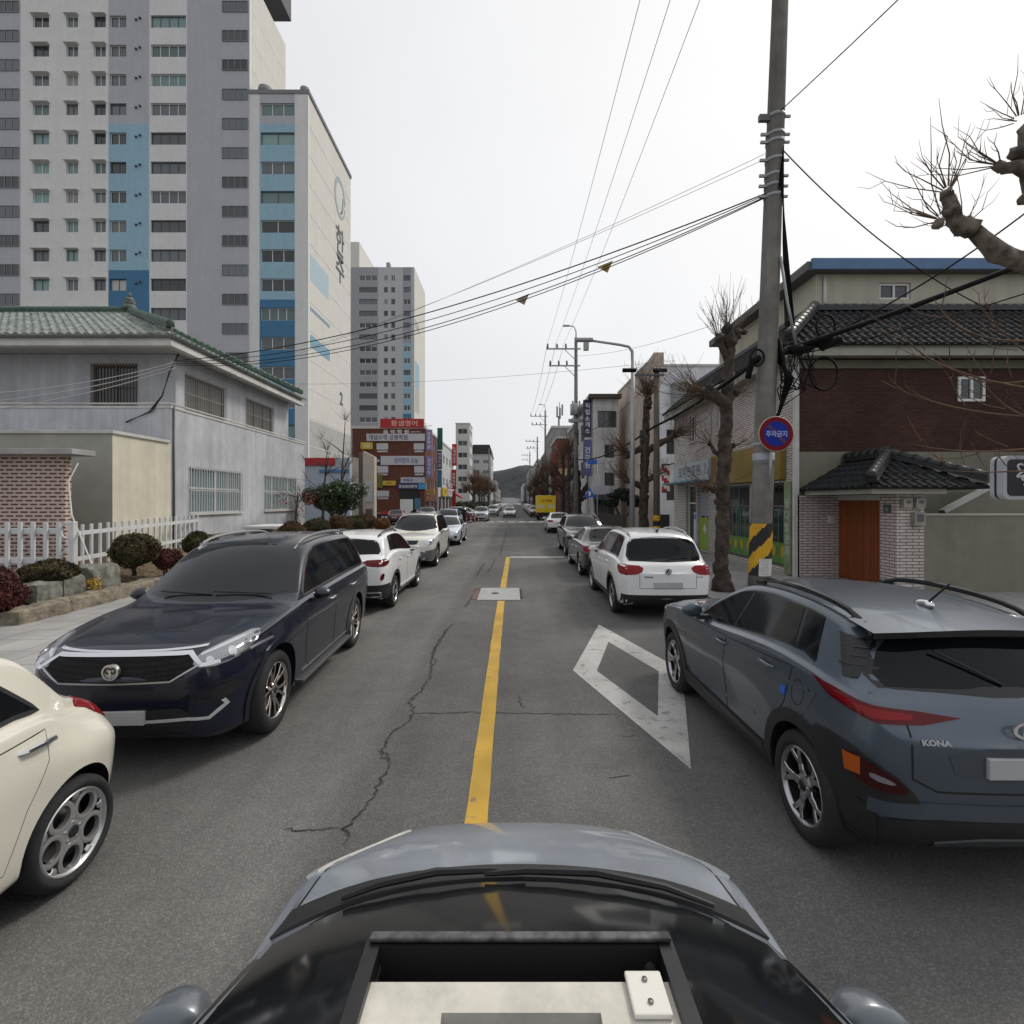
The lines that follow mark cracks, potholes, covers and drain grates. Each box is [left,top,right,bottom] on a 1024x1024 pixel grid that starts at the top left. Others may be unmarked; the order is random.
manhole cover [471,588,523,600]
crack [465,532,507,607]
crack [285,623,607,845]
